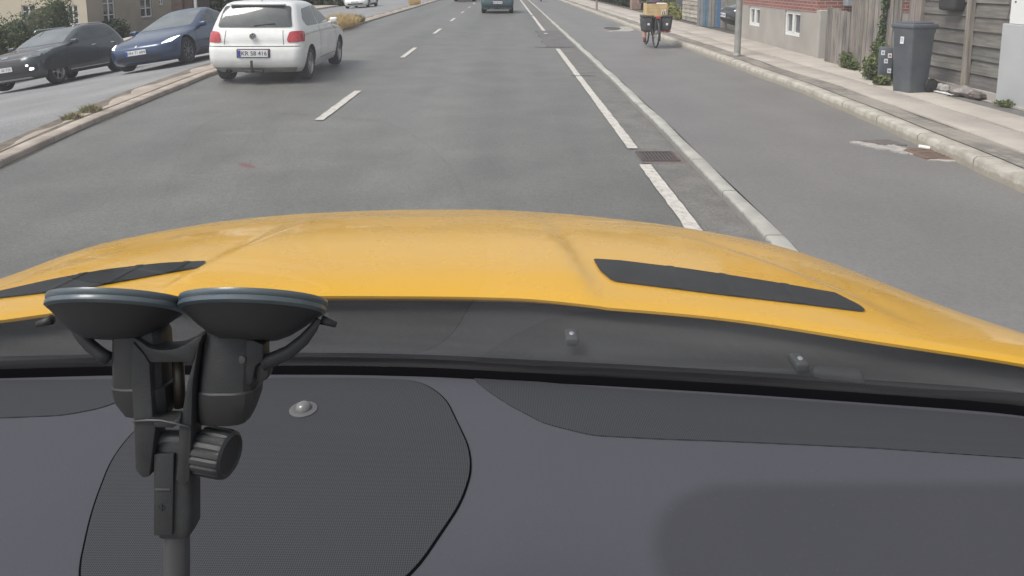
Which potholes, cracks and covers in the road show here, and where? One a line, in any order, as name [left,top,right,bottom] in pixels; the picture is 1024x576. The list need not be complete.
drain grate [635,151,688,163]
